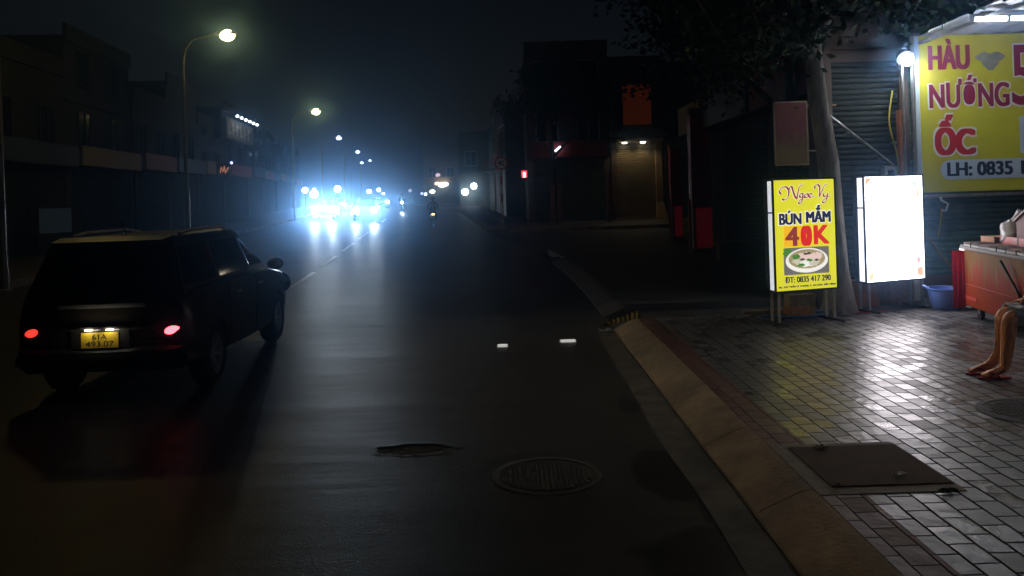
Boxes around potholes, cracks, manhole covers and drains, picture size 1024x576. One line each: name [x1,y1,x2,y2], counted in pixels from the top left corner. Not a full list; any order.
pothole [376,444,452,455]
manhole cover [975,398,1024,424]
manhole cover [493,457,602,496]
